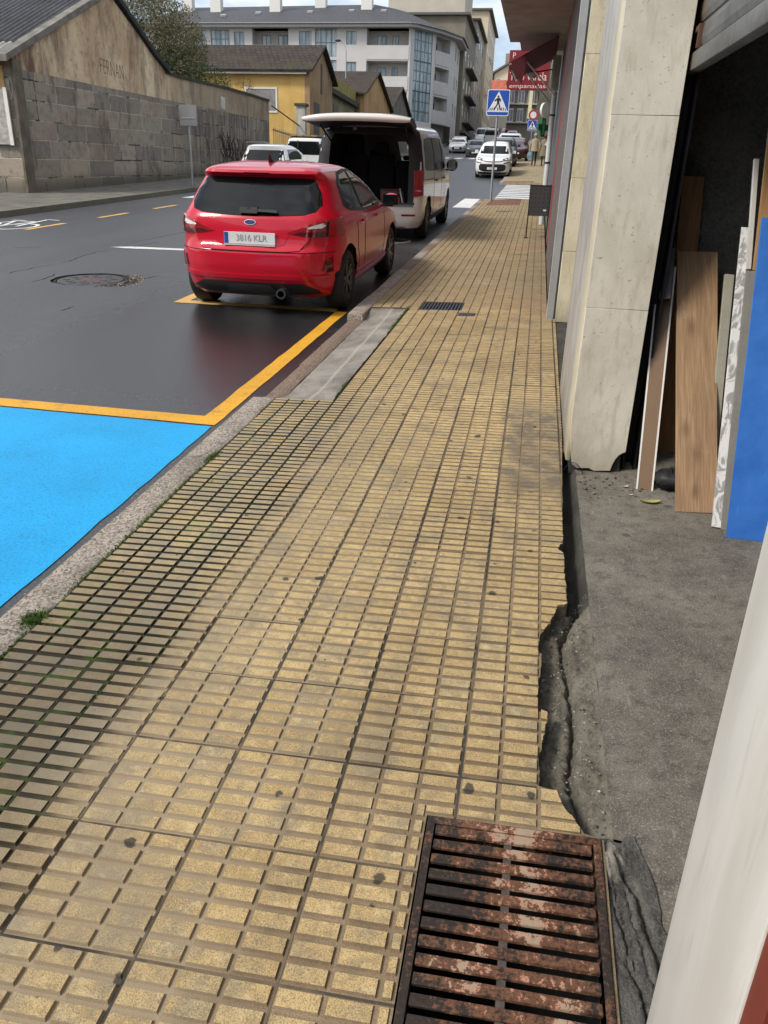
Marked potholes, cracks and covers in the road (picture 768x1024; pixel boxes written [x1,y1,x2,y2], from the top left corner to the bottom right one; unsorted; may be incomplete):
pothole [538,597,613,841]
drain grate [418,302,464,311]
crack [600,835,667,1024]
manhole cover [50,273,130,285]
drain grate [393,816,617,1024]
